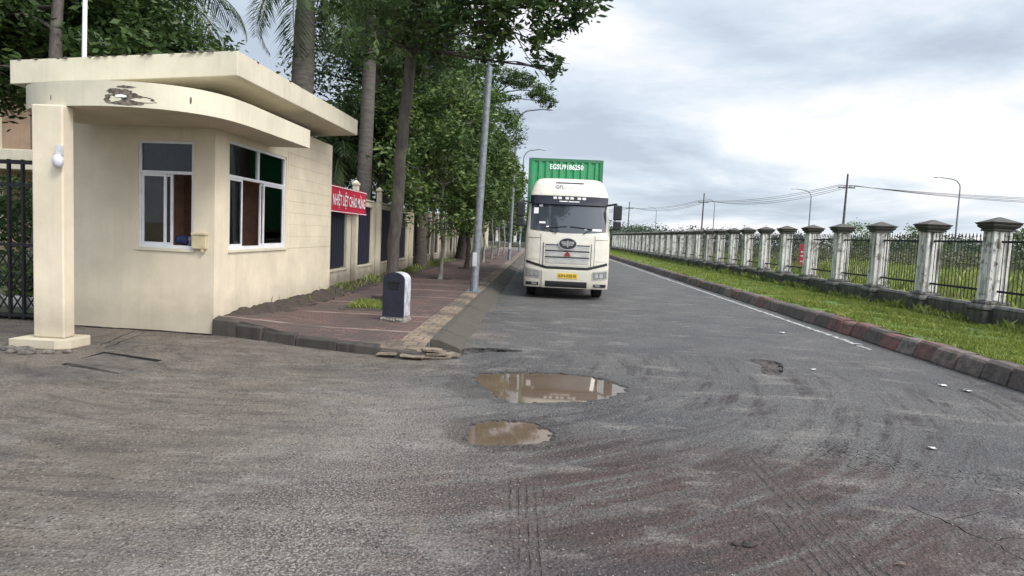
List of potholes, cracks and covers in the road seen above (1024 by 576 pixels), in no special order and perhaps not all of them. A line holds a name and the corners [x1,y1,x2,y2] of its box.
manhole cover [61,352,161,374]
crack [903,503,1024,560]
pothole [461,419,557,445]
pothole [747,359,783,375]
pothole [470,372,631,403]
